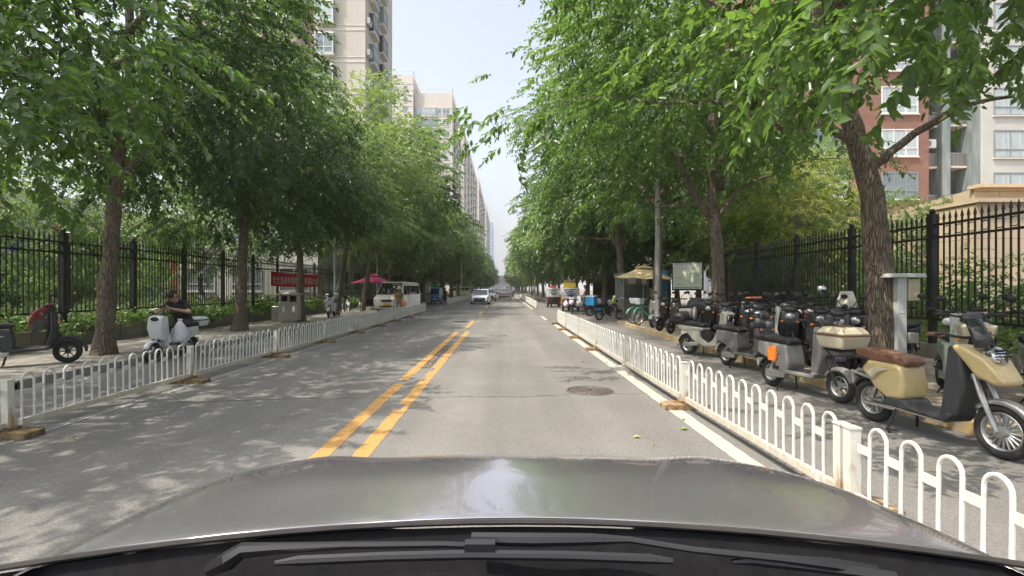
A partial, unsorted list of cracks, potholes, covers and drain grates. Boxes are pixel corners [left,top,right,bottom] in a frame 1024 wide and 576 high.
manhole cover [566,386,615,396]
